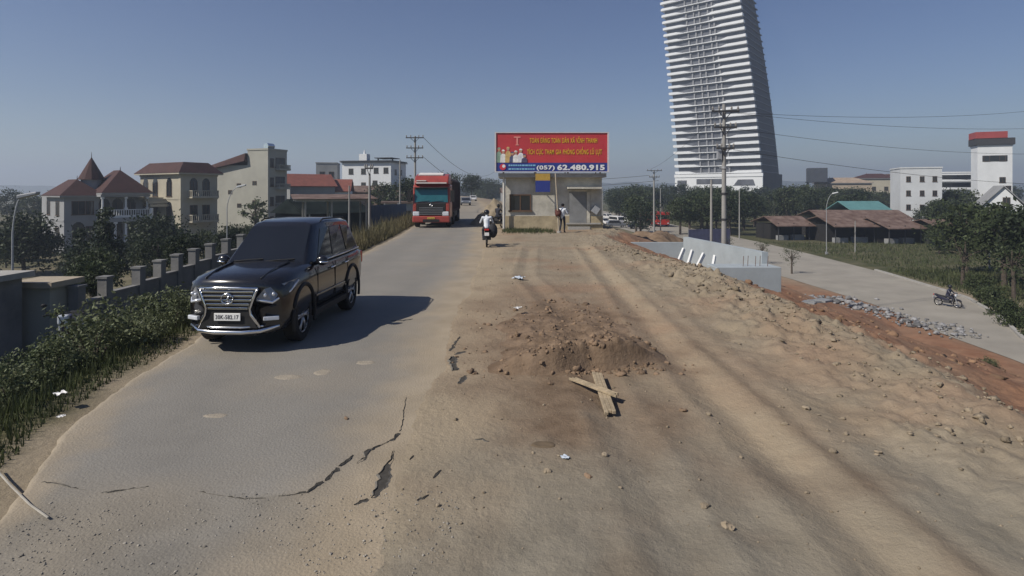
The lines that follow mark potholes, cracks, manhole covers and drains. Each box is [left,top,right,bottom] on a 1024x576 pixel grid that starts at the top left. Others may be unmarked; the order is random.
crack [448,336,466,355]
crack [201,400,406,500]
